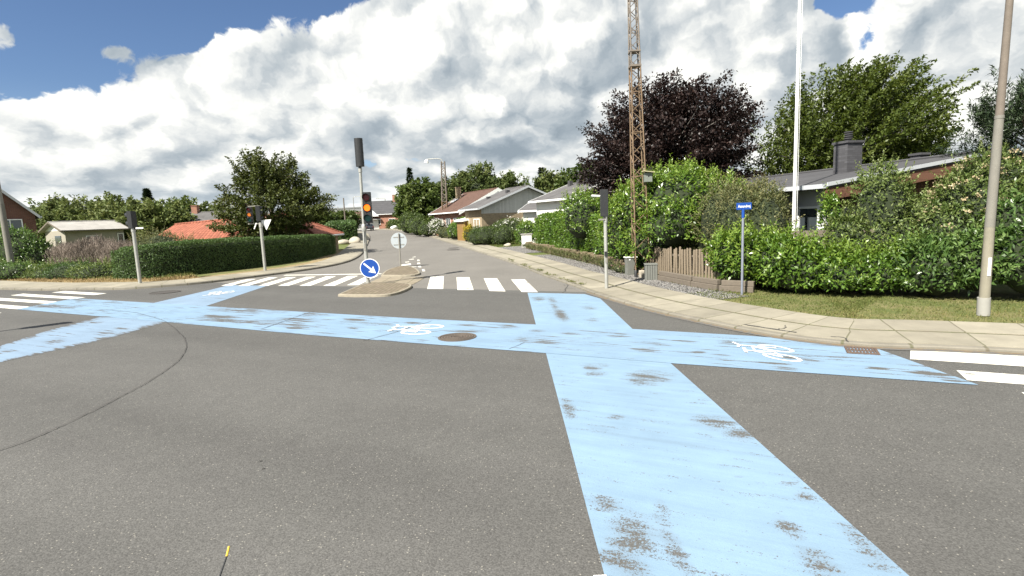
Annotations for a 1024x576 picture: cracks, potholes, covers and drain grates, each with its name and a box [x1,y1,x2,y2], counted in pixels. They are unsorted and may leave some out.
manhole cover [438,333,476,342]
drain grate [844,346,881,355]
